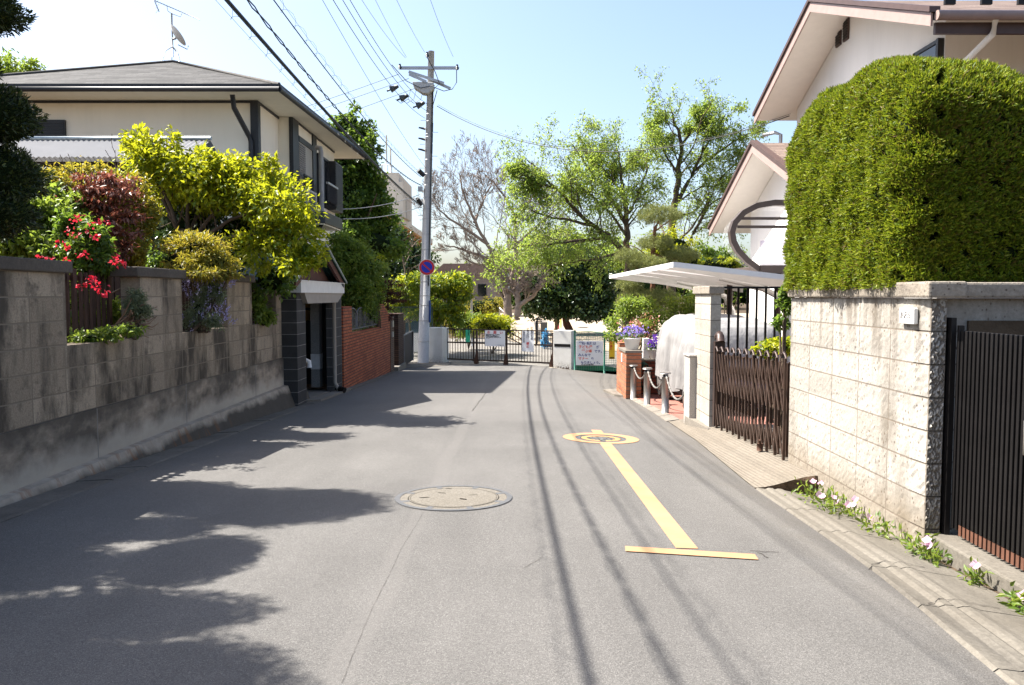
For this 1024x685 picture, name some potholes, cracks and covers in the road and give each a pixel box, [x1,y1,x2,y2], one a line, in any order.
manhole cover [394,485,513,511]
